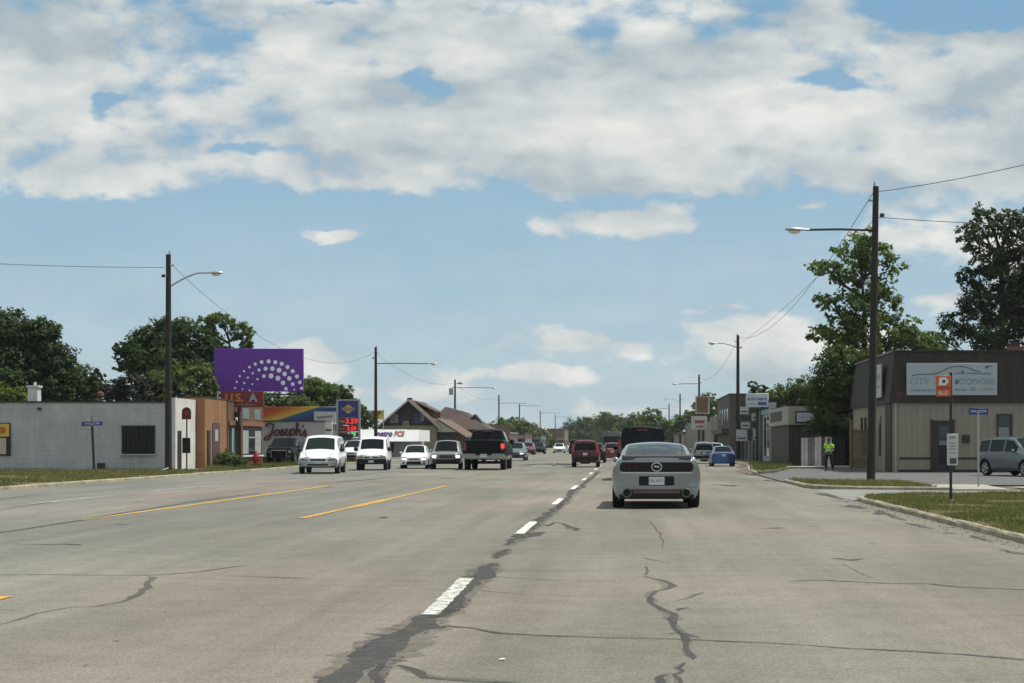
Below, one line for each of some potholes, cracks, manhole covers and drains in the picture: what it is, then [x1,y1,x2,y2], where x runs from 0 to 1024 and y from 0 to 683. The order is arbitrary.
crack [646,522,700,683]
crack [797,558,1024,590]
crack [6,576,156,623]
